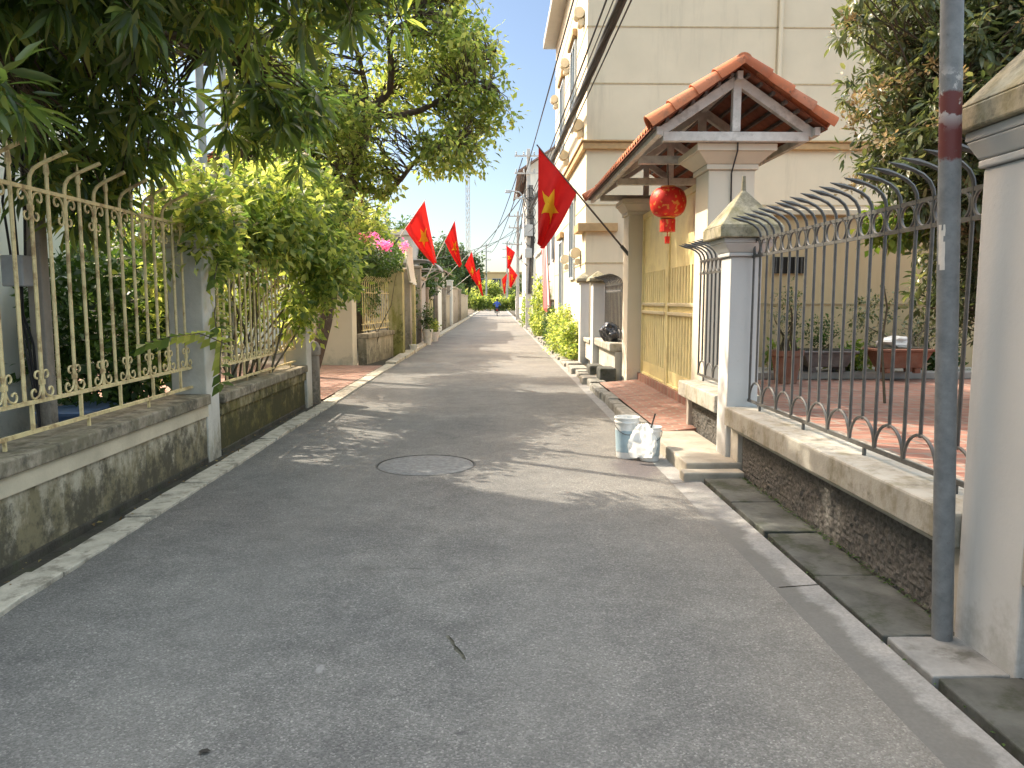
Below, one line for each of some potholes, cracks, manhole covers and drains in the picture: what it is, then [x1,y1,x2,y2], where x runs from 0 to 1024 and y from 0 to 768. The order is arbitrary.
manhole cover [375,455,476,476]
